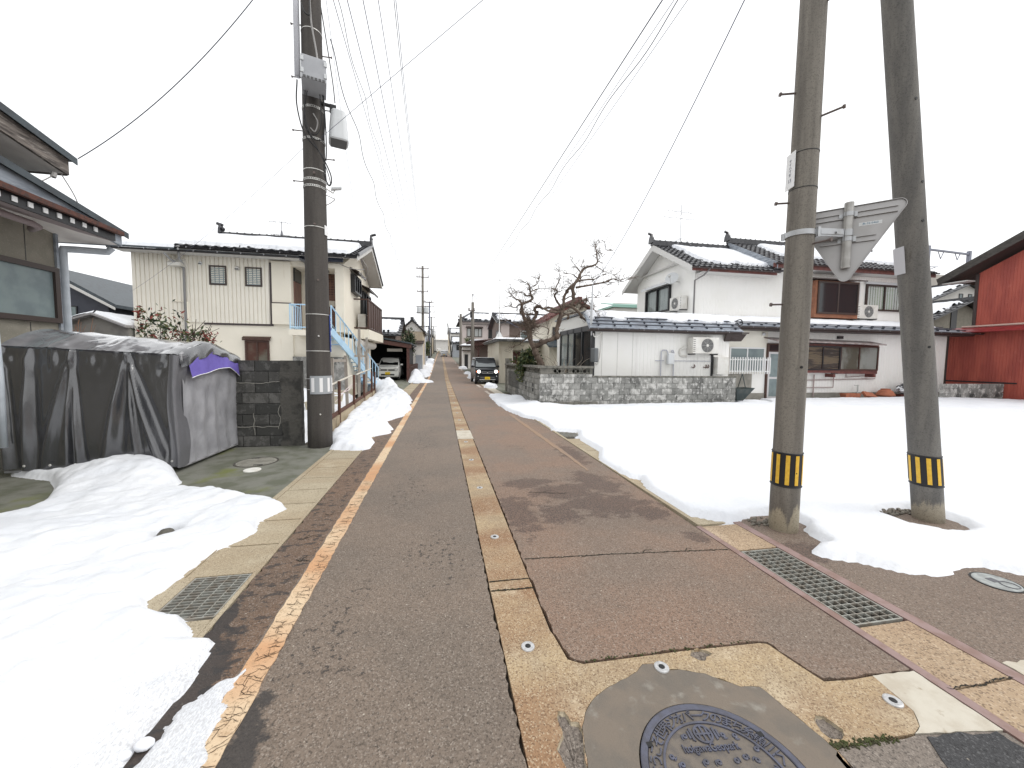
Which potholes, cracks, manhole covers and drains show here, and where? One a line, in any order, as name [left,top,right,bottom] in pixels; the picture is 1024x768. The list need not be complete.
crack [947,676,1011,689]
drain grate [741,548,903,628]
manhole cover [640,704,805,768]
manhole cover [233,457,279,467]
manhole cover [968,572,1024,594]
drain grate [158,574,252,622]
